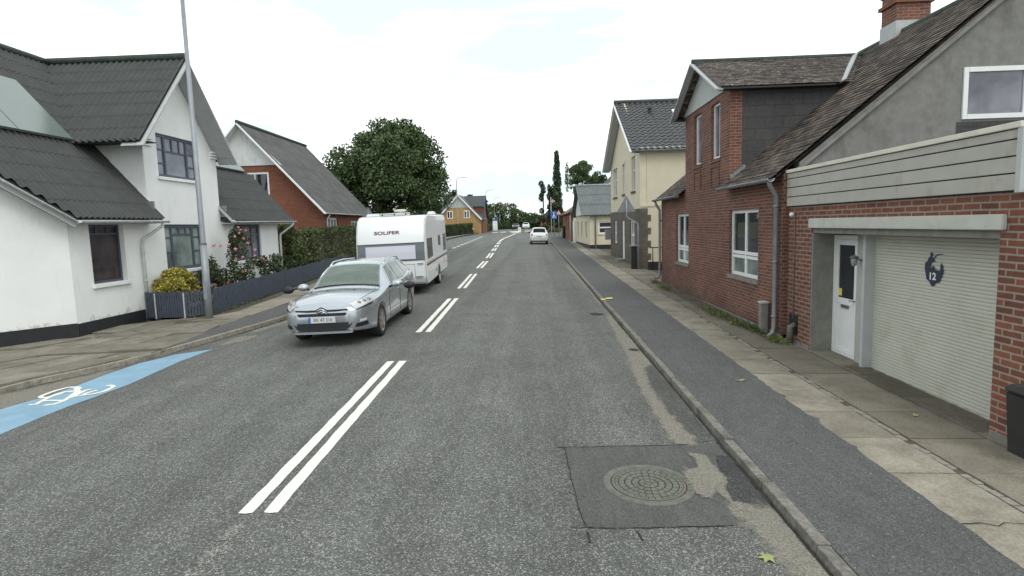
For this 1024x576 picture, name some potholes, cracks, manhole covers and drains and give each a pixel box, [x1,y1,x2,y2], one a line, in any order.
manhole cover [603,465,696,506]
